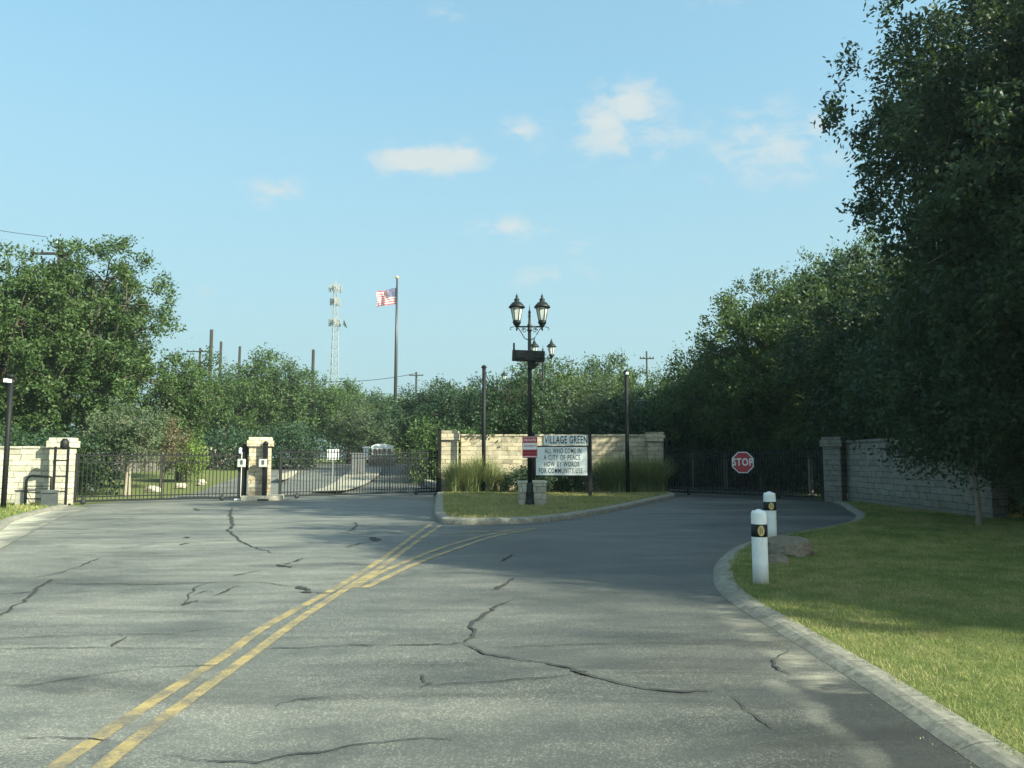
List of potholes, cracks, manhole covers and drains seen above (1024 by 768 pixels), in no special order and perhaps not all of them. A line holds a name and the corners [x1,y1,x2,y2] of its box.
crack [0,507,322,686]
crack [735,697,774,728]
crack [390,578,792,692]
crack [175,737,453,763]
crack [348,522,381,564]
